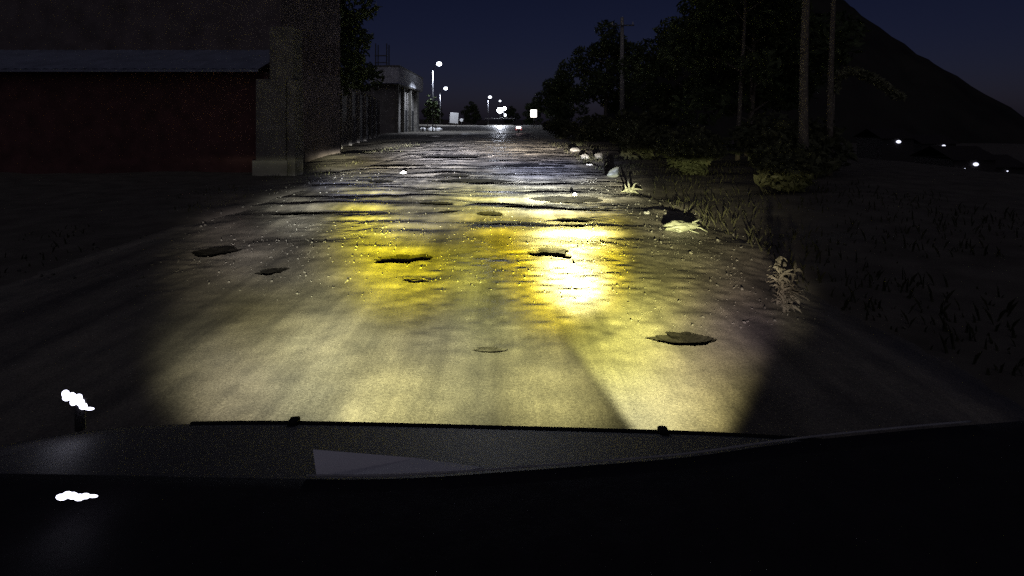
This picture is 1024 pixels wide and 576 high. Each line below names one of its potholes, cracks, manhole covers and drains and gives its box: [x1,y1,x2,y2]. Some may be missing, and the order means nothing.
pothole [455,342,524,358]
pothole [362,252,443,266]
pothole [391,276,439,286]
pothole [181,244,251,260]
pothole [470,210,510,218]
pothole [243,266,300,278]
pothole [629,327,733,351]
pothole [517,246,581,261]
